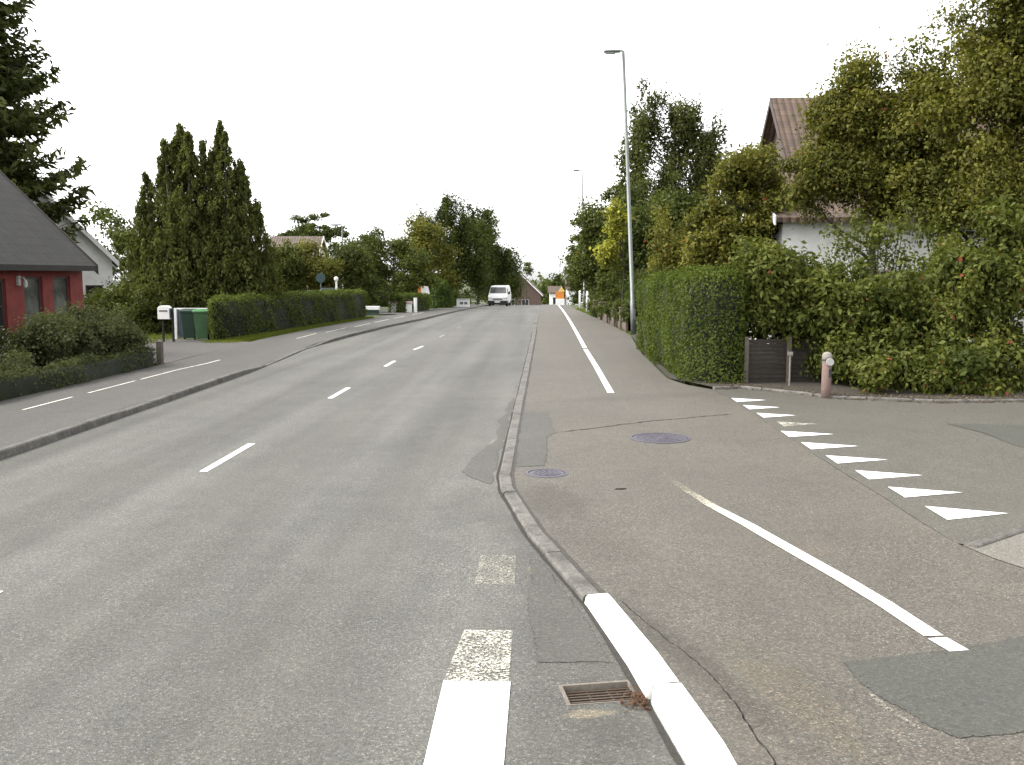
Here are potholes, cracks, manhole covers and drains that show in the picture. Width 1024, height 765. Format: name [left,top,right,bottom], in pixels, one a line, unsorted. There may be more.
drain grate [558,680,650,706]
manhole cover [525,468,568,478]
manhole cover [629,433,691,444]
crack [616,597,777,765]
